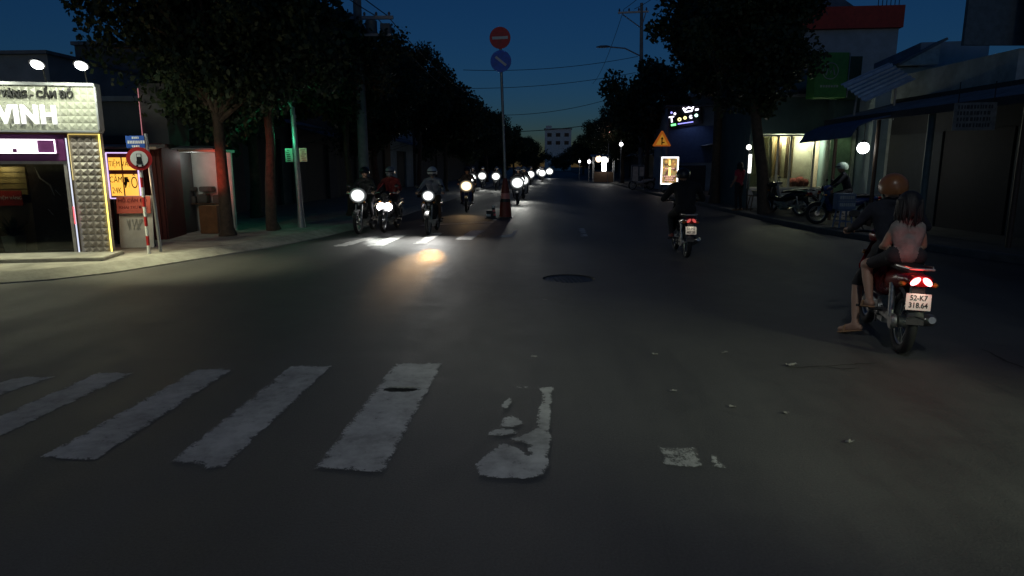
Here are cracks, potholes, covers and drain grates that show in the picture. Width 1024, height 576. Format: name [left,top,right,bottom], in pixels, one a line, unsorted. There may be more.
crack [790,362,884,370]
crack [981,349,1024,368]
manhole cover [543,274,595,283]
